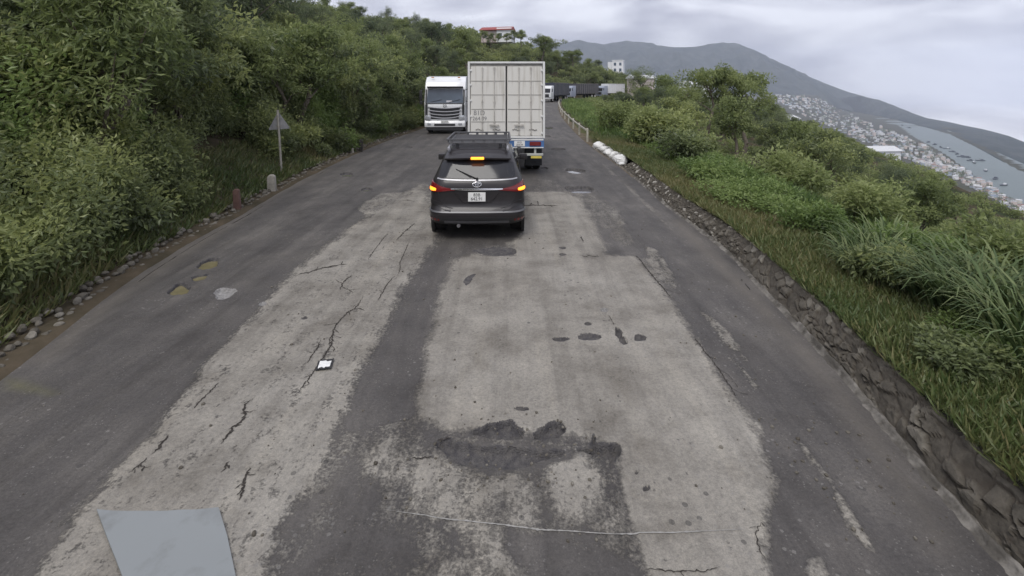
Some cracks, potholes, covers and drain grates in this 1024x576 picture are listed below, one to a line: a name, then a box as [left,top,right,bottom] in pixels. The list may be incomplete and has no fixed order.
crack [194,382,255,441]
pothole [608,324,634,349]
crack [292,223,415,395]
pothole [523,416,574,447]
pothole [188,255,227,272]
pothole [159,279,200,299]
crack [131,436,169,473]
pothole [428,432,576,477]
pothole [572,330,609,345]
pothole [625,331,653,345]
